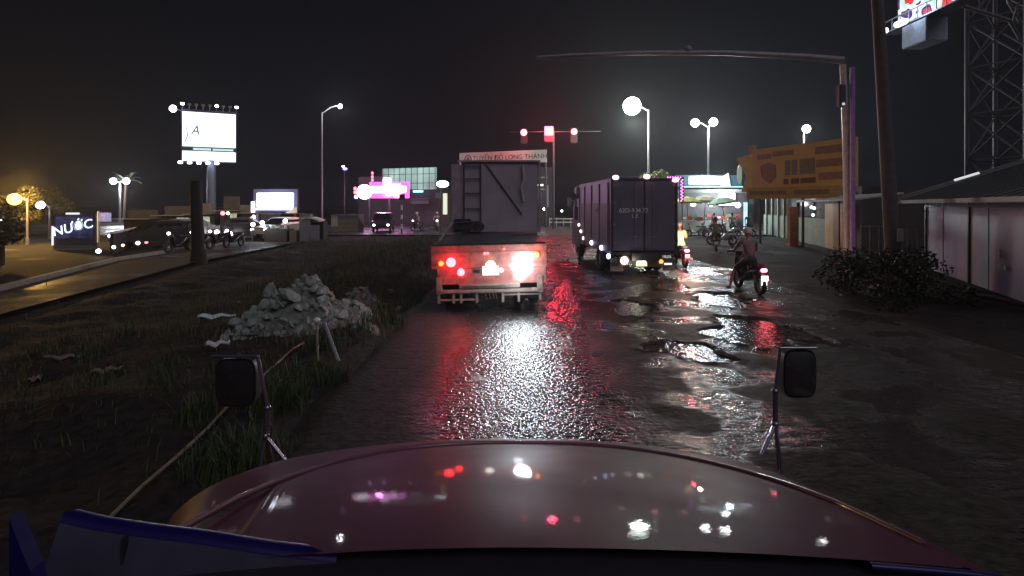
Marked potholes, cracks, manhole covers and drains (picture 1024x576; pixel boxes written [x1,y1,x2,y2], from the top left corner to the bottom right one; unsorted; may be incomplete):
pothole [678,290,761,310]
pothole [689,312,849,350]
pothole [607,296,663,319]
pothole [631,338,751,365]
